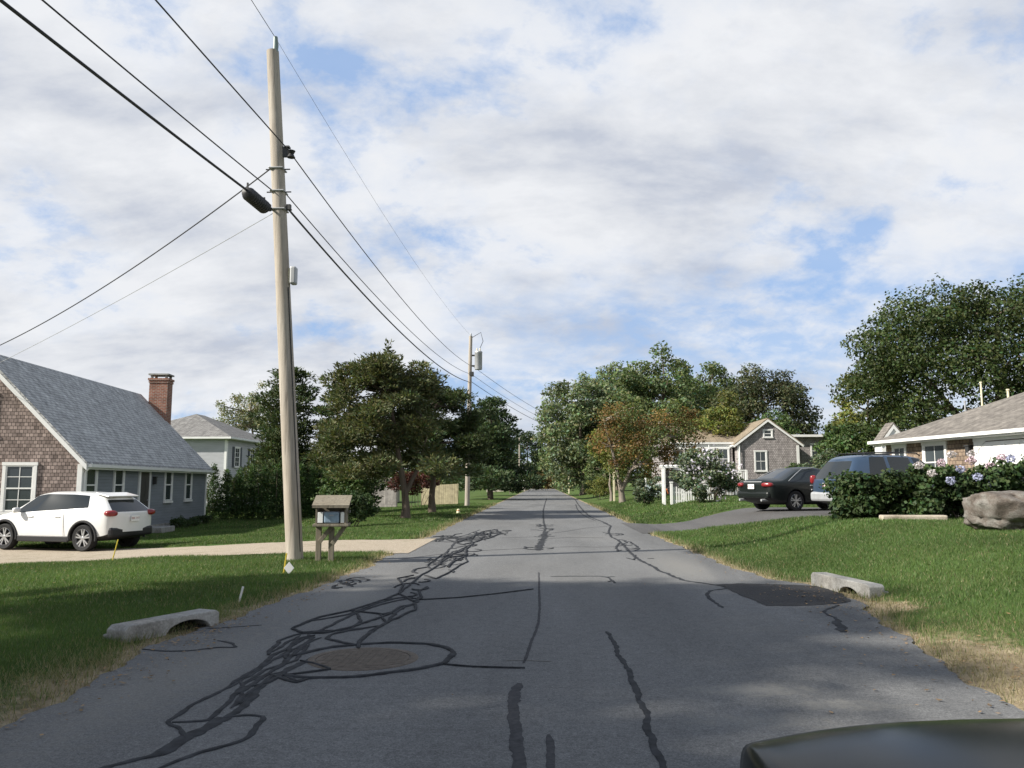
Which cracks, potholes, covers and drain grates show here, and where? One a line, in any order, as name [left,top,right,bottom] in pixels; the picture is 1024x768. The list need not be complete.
crack [100,498,727,768]
manhole cover [307,647,419,671]
